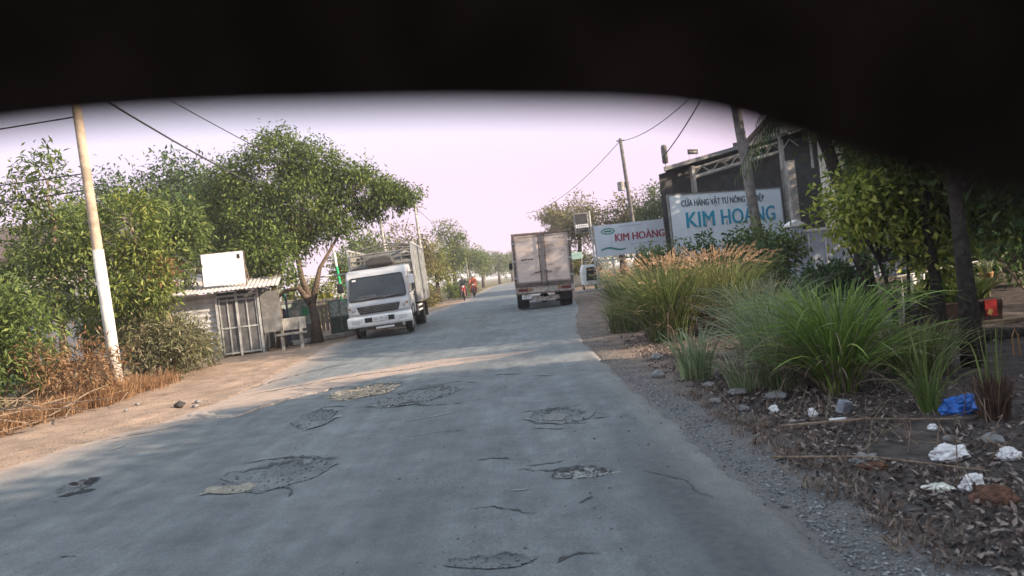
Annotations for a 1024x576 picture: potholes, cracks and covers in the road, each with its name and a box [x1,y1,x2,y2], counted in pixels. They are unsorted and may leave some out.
pothole [529,407,595,424]
crack [557,551,593,563]
pothole [366,384,465,408]
pothole [220,457,339,494]
crack [476,457,608,472]
pothole [56,479,98,493]
pothole [290,407,338,430]
pothole [552,465,621,479]
pothole [442,551,538,569]
